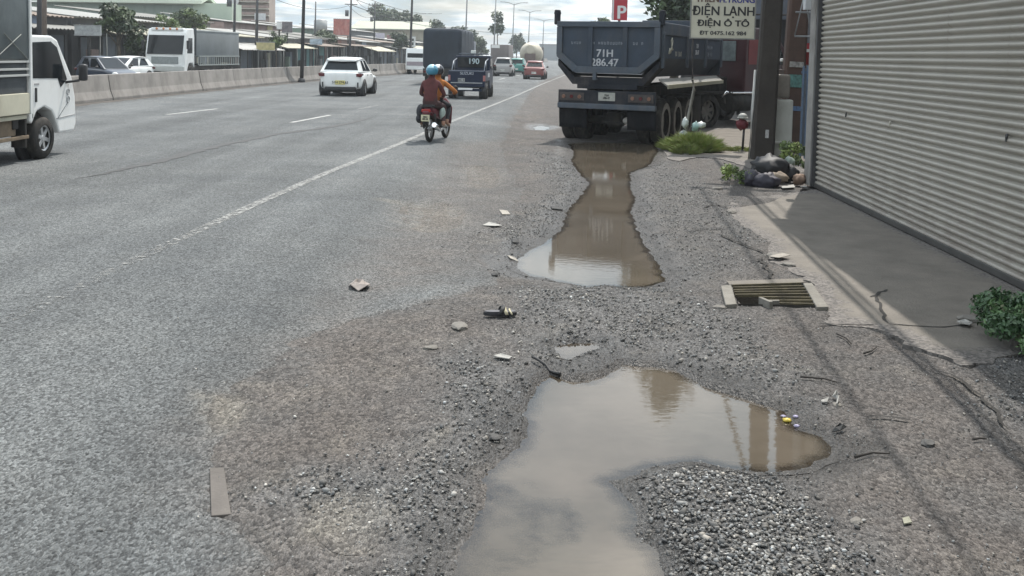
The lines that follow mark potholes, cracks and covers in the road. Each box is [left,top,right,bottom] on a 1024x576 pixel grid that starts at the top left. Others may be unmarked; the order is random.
pothole [549,339,605,360]
crack [870,289,888,323]
crack [690,228,774,279]
pothole [508,142,673,288]
crack [933,369,1009,429]
pothole [437,357,851,576]
drain grate [721,278,829,311]
